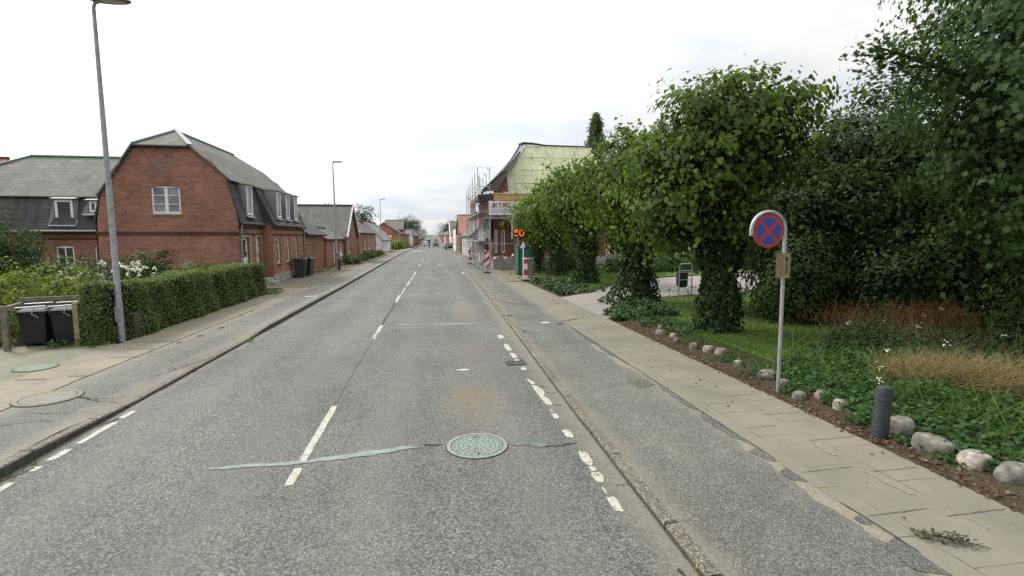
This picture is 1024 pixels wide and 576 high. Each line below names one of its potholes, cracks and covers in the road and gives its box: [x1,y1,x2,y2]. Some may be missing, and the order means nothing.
manhole cover [446,433,508,459]
manhole cover [9,389,85,407]
manhole cover [11,363,60,372]
